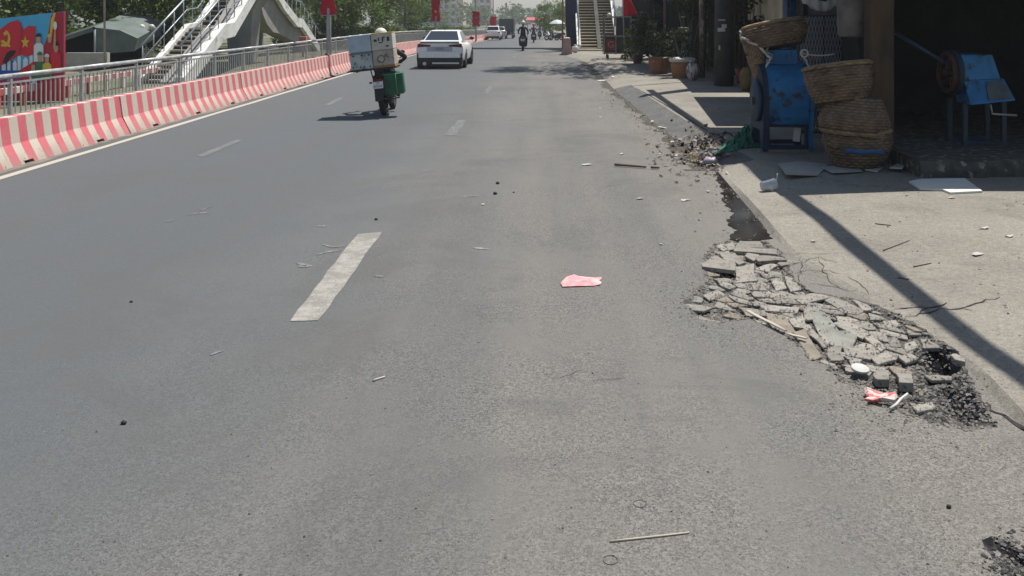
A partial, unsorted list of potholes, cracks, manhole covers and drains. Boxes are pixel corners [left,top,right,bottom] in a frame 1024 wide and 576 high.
pothole [682,240,998,431]
pothole [982,536,1024,576]
crack [783,253,869,294]
crack [902,297,999,319]
